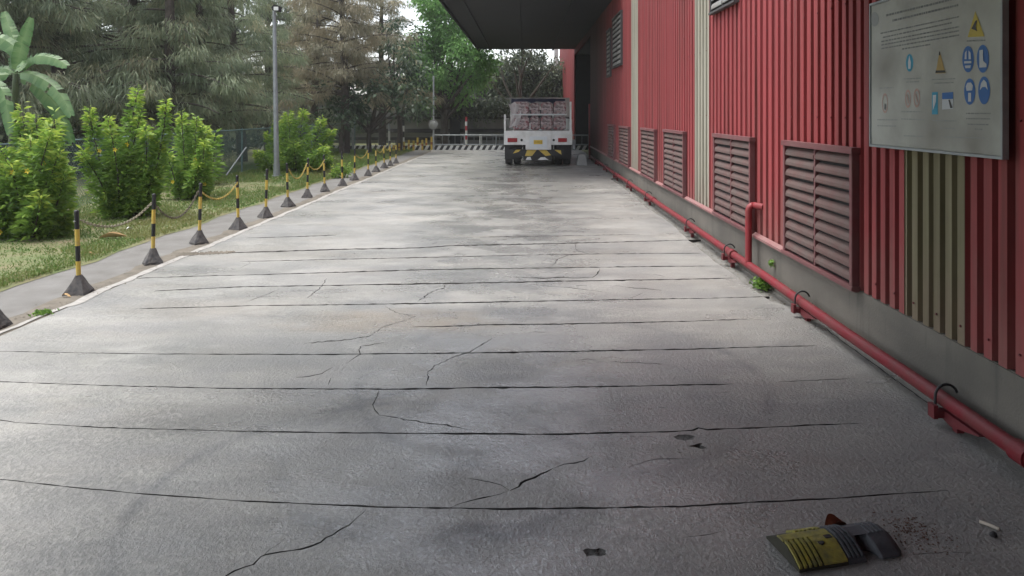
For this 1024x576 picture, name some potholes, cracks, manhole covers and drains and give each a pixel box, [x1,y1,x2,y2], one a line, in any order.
crack [0,457,948,576]
crack [0,234,928,435]
pothole [583,548,606,557]
